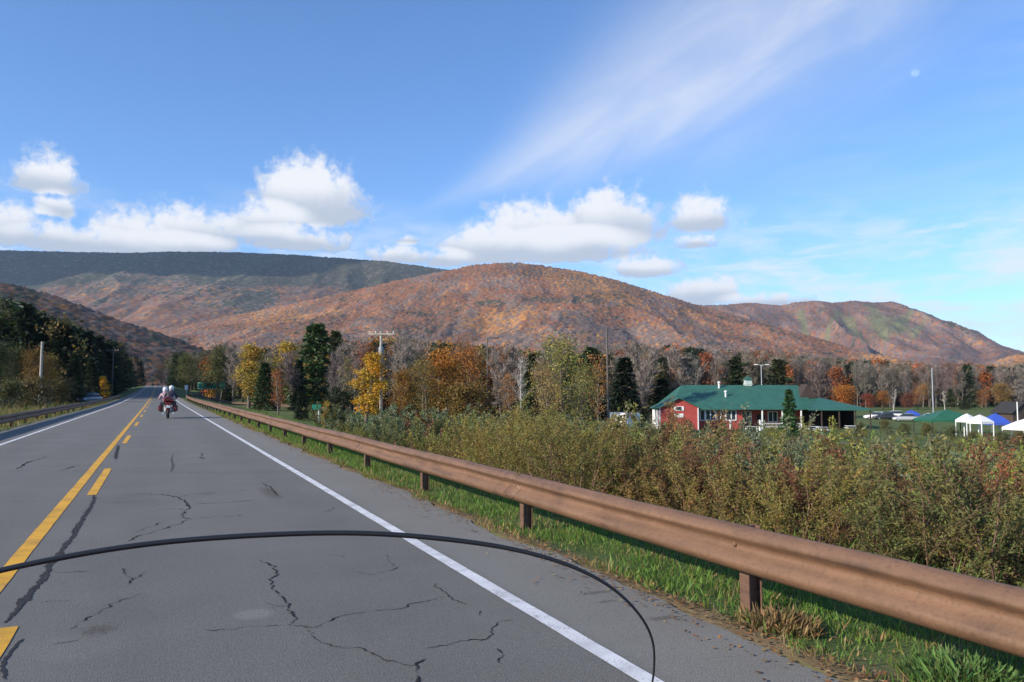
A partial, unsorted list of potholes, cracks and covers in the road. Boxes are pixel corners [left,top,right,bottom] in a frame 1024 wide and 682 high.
crack [128,483,278,541]
crack [217,562,512,682]
crack [54,568,141,644]
